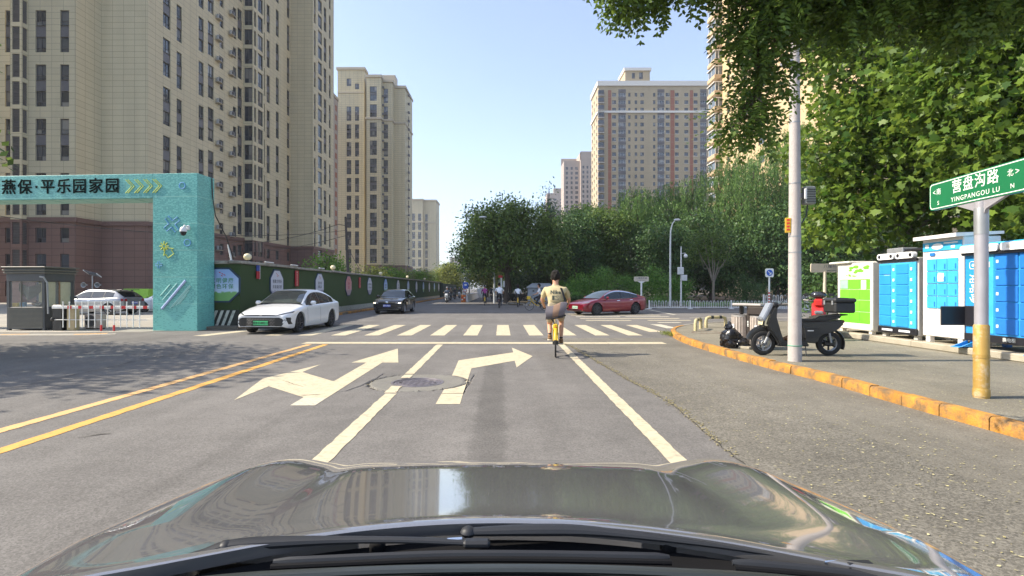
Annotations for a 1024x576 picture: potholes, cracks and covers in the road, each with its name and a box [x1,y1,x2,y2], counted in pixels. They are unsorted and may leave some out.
manhole cover [389,378,444,387]
